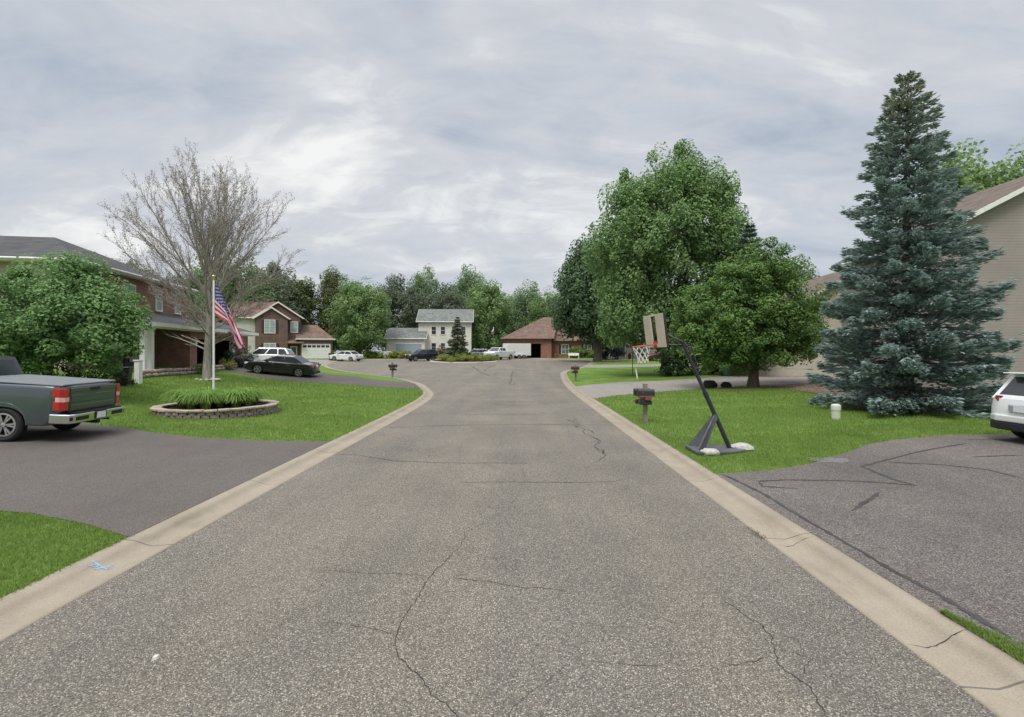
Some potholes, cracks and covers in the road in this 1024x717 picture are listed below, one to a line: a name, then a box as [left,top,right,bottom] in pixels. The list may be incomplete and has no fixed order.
crack [387,401,606,460]
crack [719,603,827,717]
crack [309,477,567,717]
